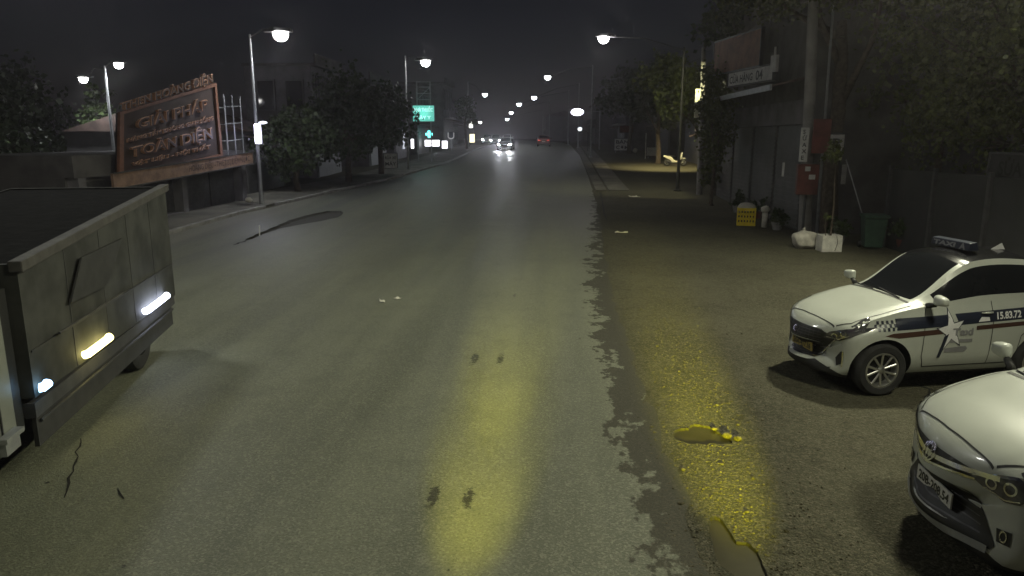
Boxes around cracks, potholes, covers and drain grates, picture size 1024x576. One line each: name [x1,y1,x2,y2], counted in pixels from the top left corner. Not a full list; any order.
pothole [669,423,736,446]
pothole [706,512,770,576]
crack [64,438,82,498]
pothole [245,211,343,240]
